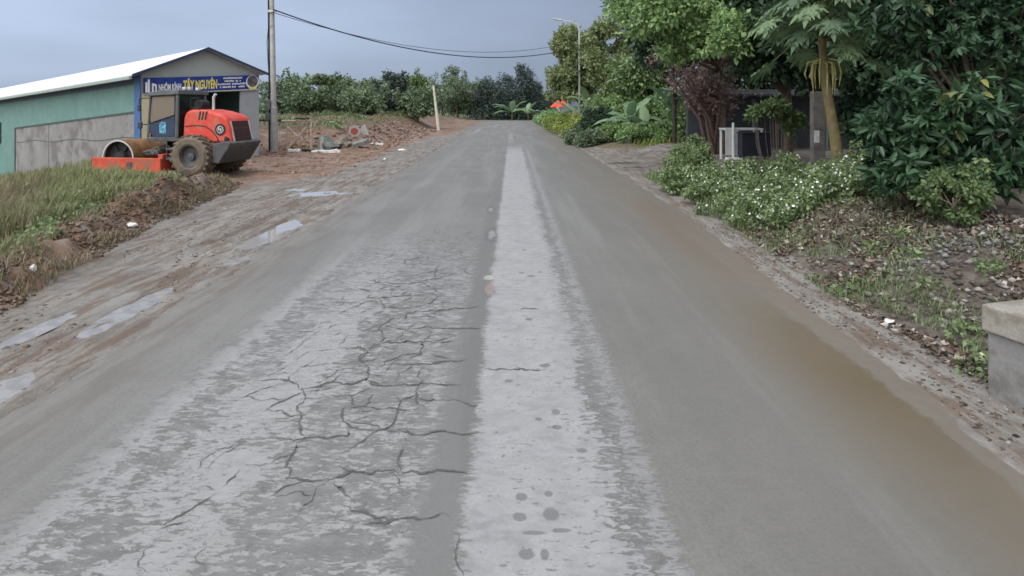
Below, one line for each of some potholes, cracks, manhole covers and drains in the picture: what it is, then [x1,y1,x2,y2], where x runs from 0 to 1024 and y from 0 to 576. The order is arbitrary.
crack [454,530,464,576]
crack [157,232,484,530]
